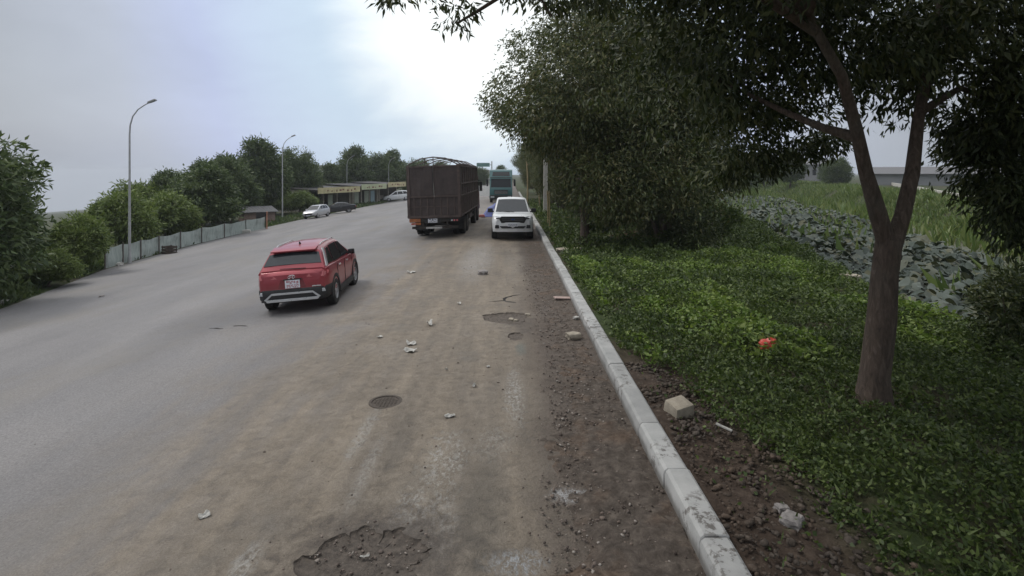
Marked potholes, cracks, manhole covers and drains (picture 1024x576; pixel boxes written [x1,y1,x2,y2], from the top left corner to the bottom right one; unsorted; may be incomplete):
manhole cover [369,395,402,409]
pothole [293,525,432,576]
pothole [483,312,527,325]
